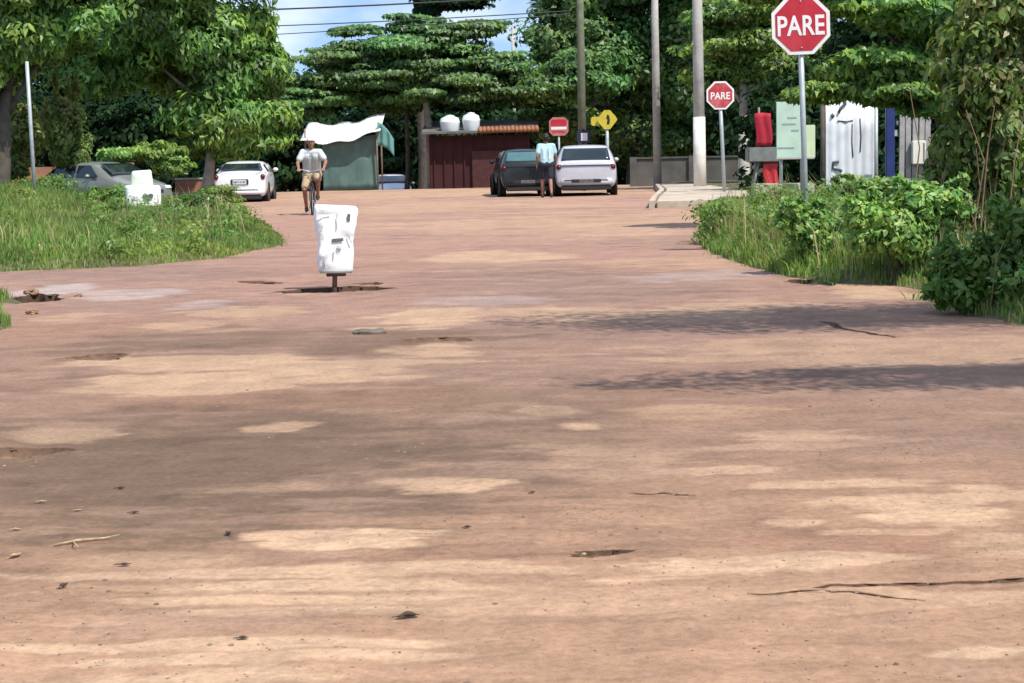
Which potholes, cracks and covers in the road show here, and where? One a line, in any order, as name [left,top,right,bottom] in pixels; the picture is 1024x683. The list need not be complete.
pothole [3,293,71,307]
pothole [562,548,649,560]
pothole [388,337,481,345]
crack [810,321,903,338]
pothole [50,353,137,362]
crack [745,576,1024,603]
pothole [256,285,412,296]
pothole [0,447,92,462]
